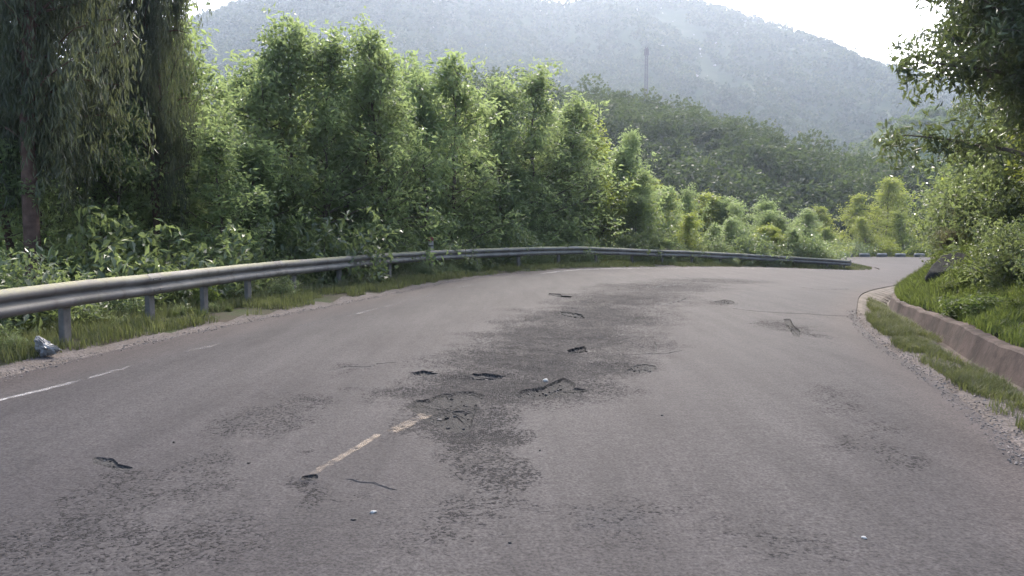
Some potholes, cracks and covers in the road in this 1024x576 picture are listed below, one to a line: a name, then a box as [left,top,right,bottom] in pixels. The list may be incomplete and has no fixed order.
pothole [627,364,657,373]
crack [347,479,395,490]
pothole [514,378,587,399]
pothole [92,457,133,472]
pothole [784,319,801,337]
